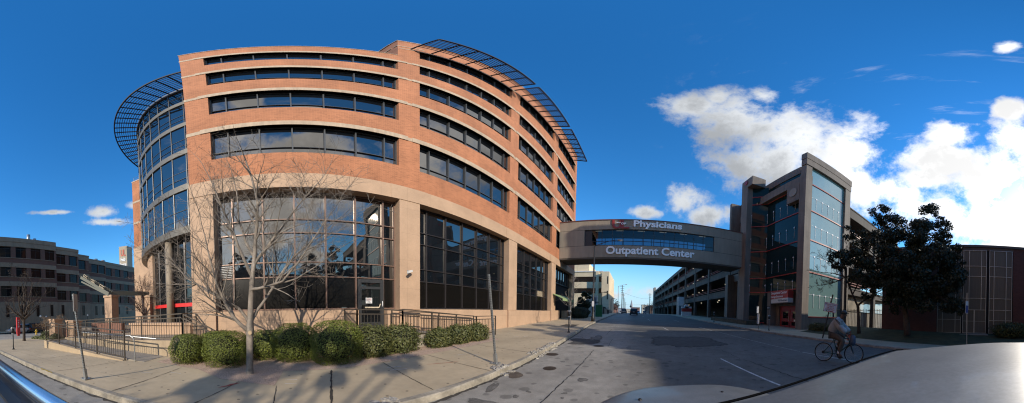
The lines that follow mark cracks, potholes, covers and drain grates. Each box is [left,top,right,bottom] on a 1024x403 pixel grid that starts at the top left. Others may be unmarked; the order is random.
crack [540,329,621,403]
